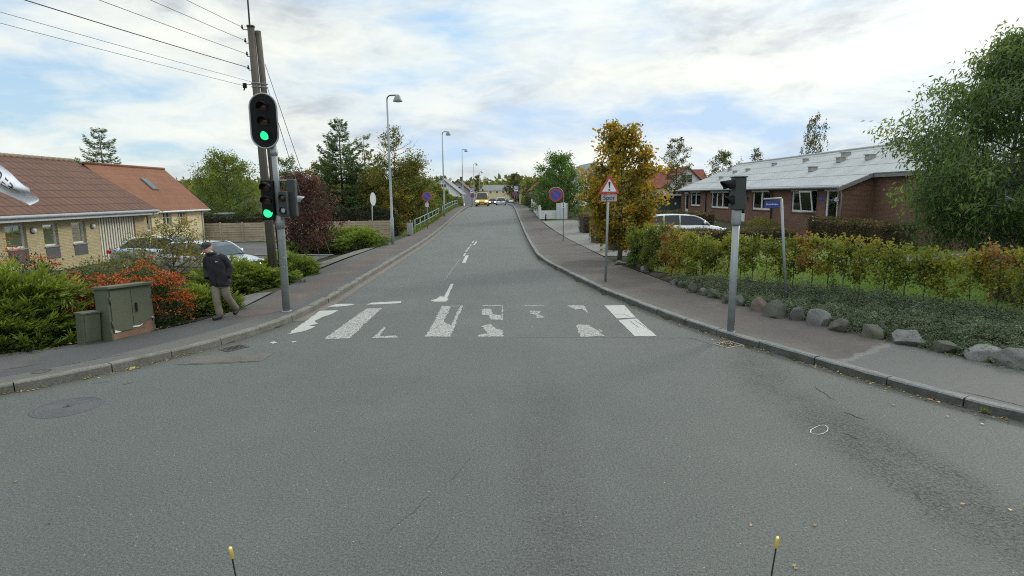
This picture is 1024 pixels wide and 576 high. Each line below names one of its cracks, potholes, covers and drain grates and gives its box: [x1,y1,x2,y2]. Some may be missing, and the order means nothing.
drain grate [218,344,250,352]
manhole cover [28,396,104,419]
